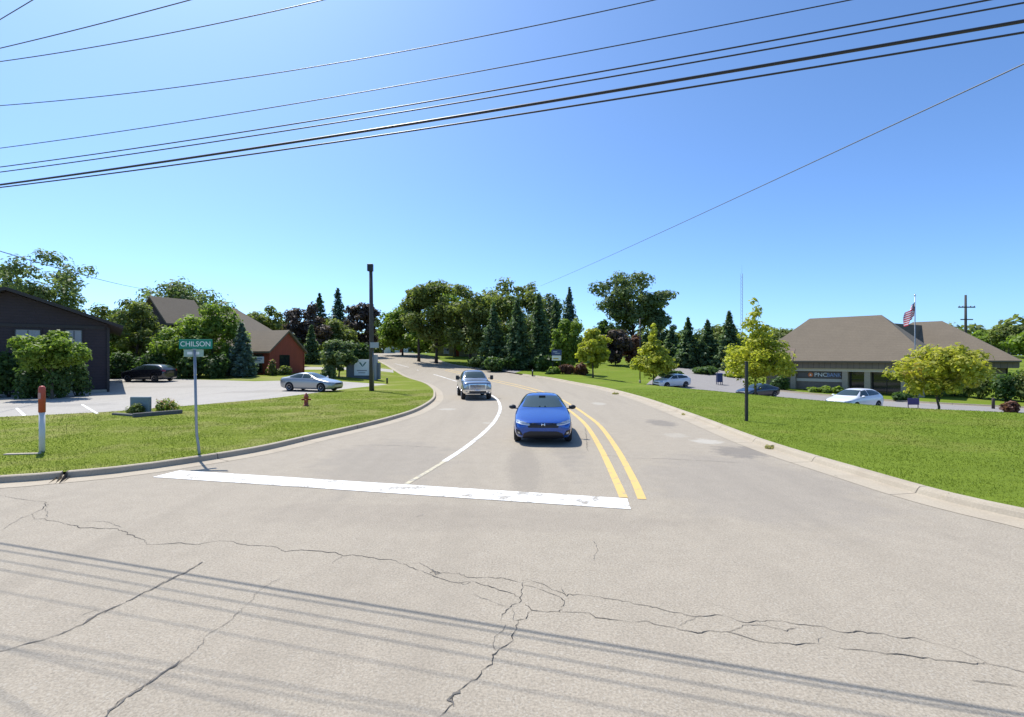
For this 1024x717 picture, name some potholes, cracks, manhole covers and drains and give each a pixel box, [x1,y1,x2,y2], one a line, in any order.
crack [4,496,1024,716]
